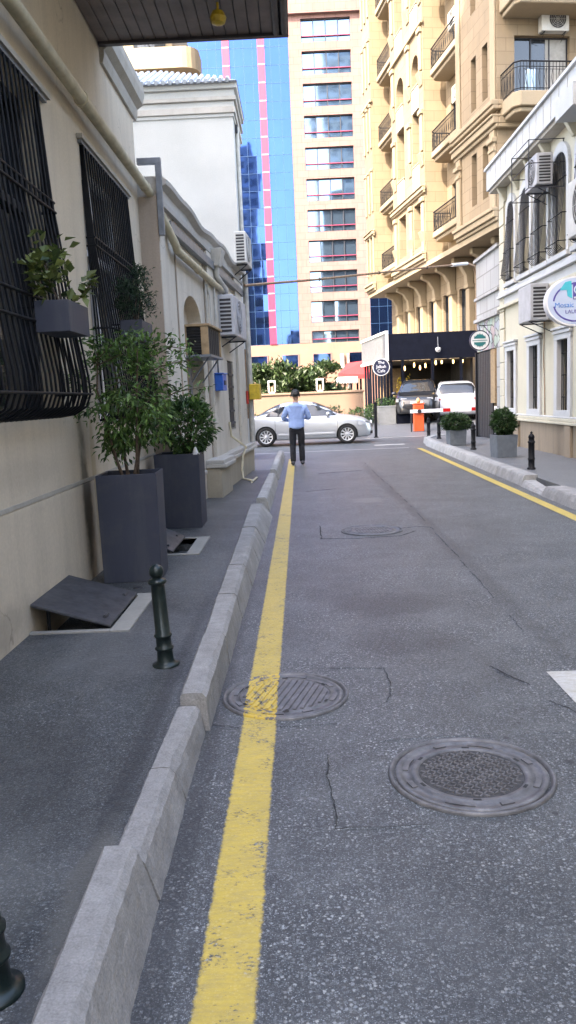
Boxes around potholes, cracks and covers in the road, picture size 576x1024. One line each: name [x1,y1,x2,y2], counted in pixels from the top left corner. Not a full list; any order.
manhole cover [341,525,403,536]
manhole cover [222,672,349,721]
manhole cover [388,737,558,817]
